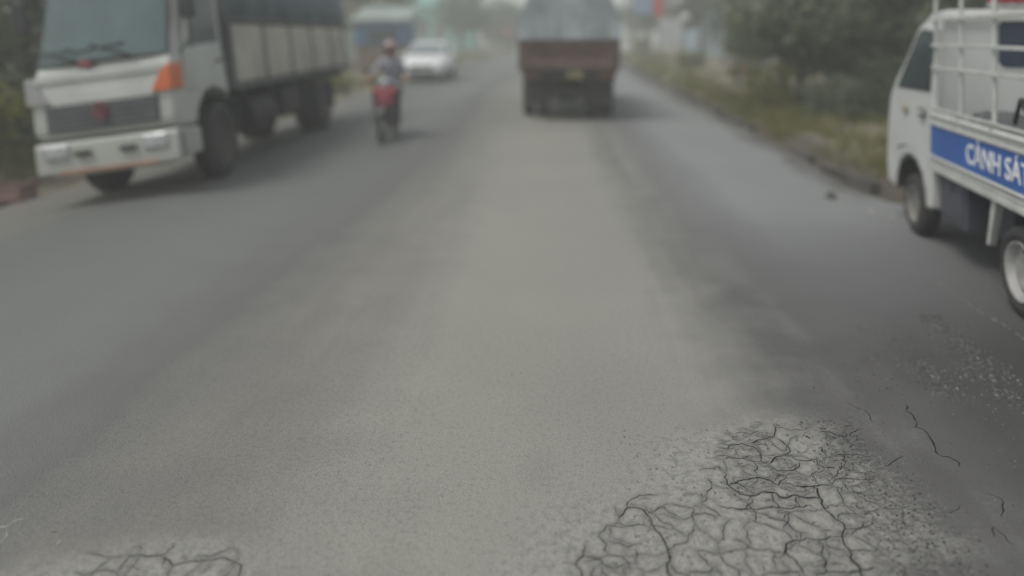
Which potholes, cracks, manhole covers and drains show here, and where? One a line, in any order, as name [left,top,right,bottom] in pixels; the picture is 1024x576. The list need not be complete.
crack [985,493,1014,545]
crack [76,542,242,576]
crack [0,519,21,542]
crack [905,404,960,466]
crack [572,417,942,576]
